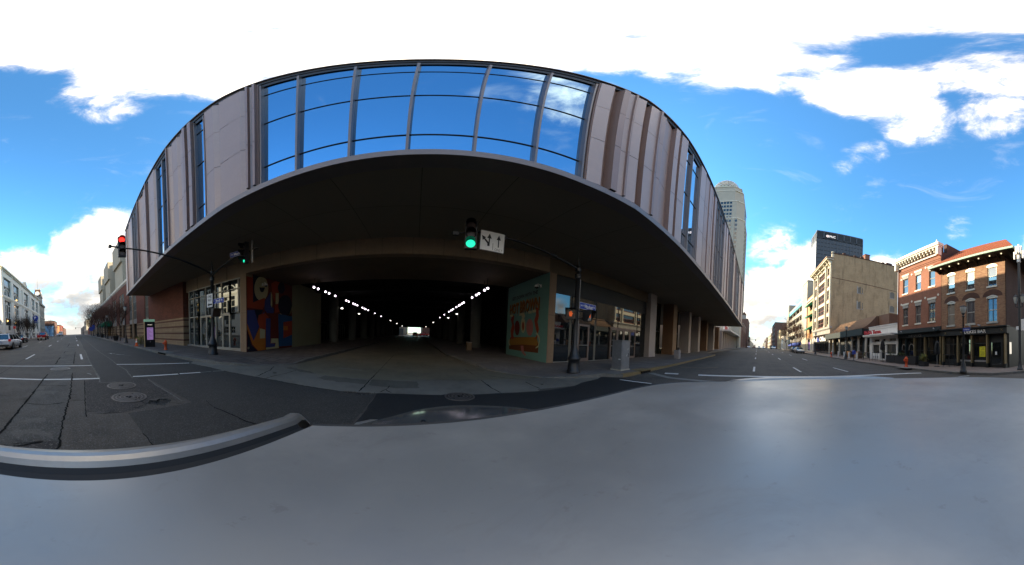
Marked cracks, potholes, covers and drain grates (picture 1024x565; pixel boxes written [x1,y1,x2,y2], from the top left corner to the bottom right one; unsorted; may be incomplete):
manhole cover [445,392,475,401]
manhole cover [111,392,147,403]
